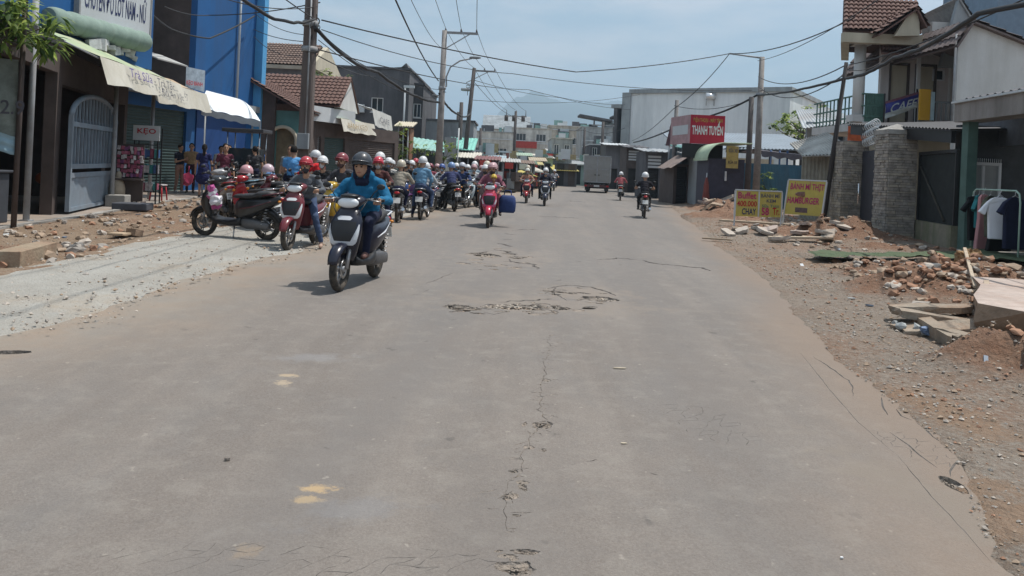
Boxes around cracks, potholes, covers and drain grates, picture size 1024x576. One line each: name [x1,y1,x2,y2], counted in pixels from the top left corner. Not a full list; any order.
crack [93,543,498,576]
pothole [455,248,534,270]
pothole [443,304,492,314]
crack [599,258,711,271]
crack [815,358,965,477]
crack [666,404,757,446]
pothole [938,476,969,494]
pothole [494,550,537,576]
